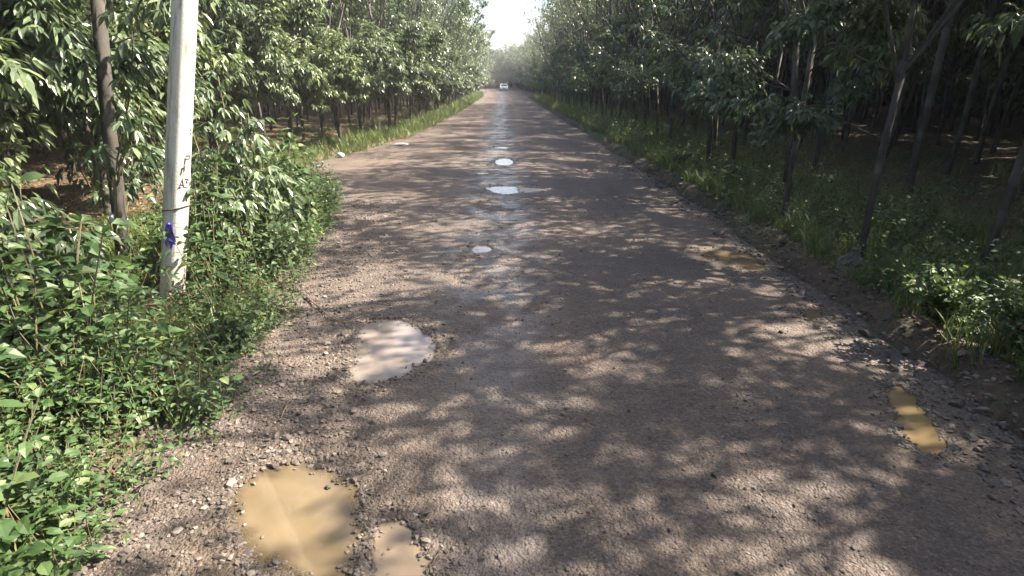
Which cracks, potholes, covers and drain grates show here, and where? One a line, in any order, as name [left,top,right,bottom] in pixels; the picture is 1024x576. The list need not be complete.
pothole [218,454,378,576]
pothole [793,303,830,324]
pothole [462,241,503,256]
pothole [490,157,518,166]
pothole [355,510,445,576]
pothole [880,380,955,461]
pothole [479,184,556,195]
pothole [343,315,448,389]
pothole [692,245,776,275]
